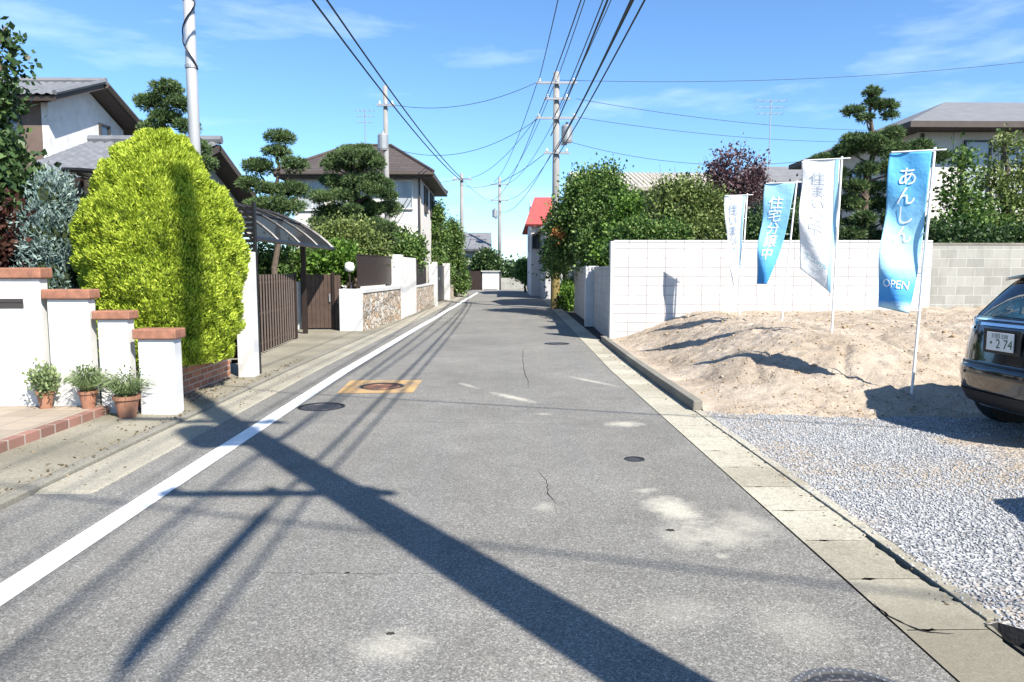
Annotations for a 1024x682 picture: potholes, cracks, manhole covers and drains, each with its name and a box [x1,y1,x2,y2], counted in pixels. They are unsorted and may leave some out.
manhole cover [790,667,896,682]
manhole cover [297,402,346,411]
crack [874,603,954,634]
